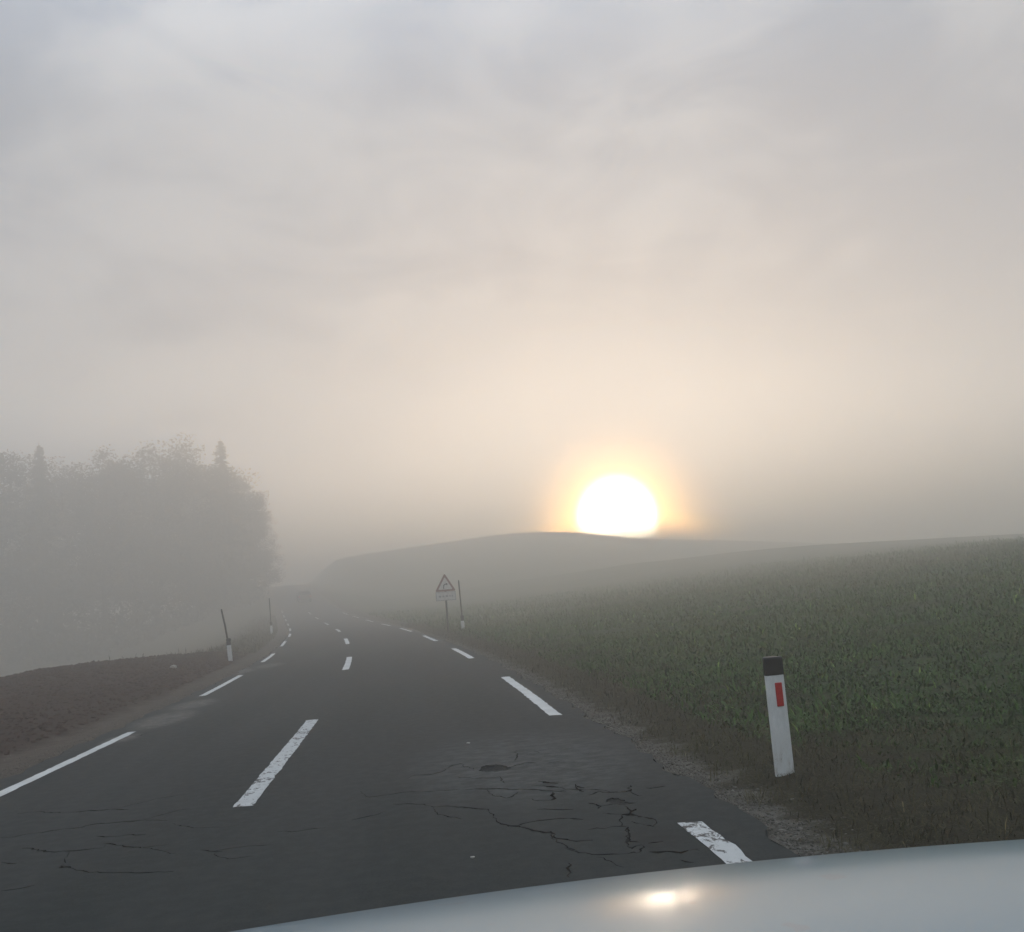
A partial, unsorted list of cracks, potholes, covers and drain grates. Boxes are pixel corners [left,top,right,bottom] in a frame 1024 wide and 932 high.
crack [2,794,235,873]
crack [360,751,697,877]
pothole [479,764,511,772]
crack [205,828,318,859]
